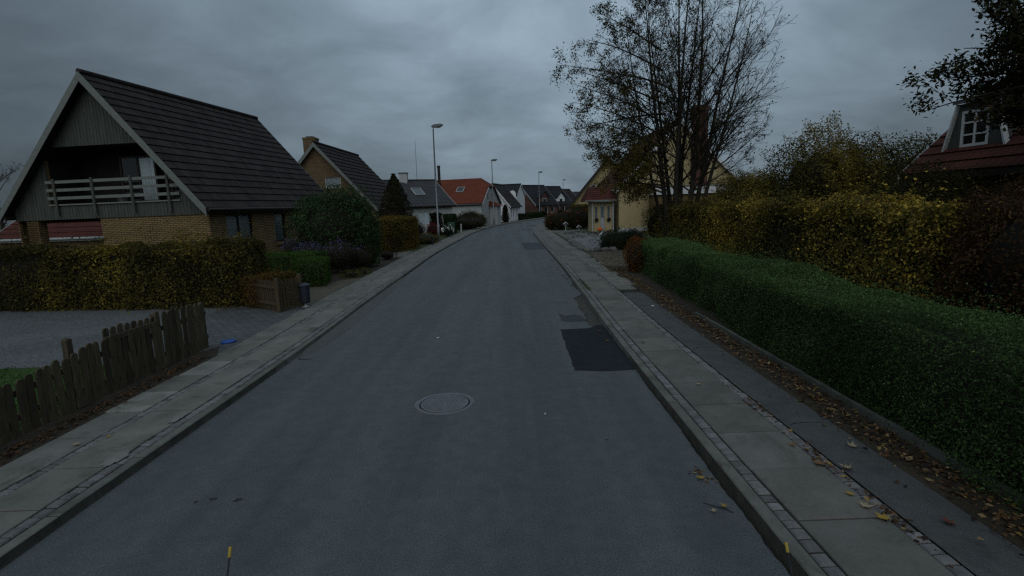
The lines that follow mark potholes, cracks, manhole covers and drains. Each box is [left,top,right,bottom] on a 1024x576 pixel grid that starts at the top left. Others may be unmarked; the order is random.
manhole cover [415,393,474,415]
